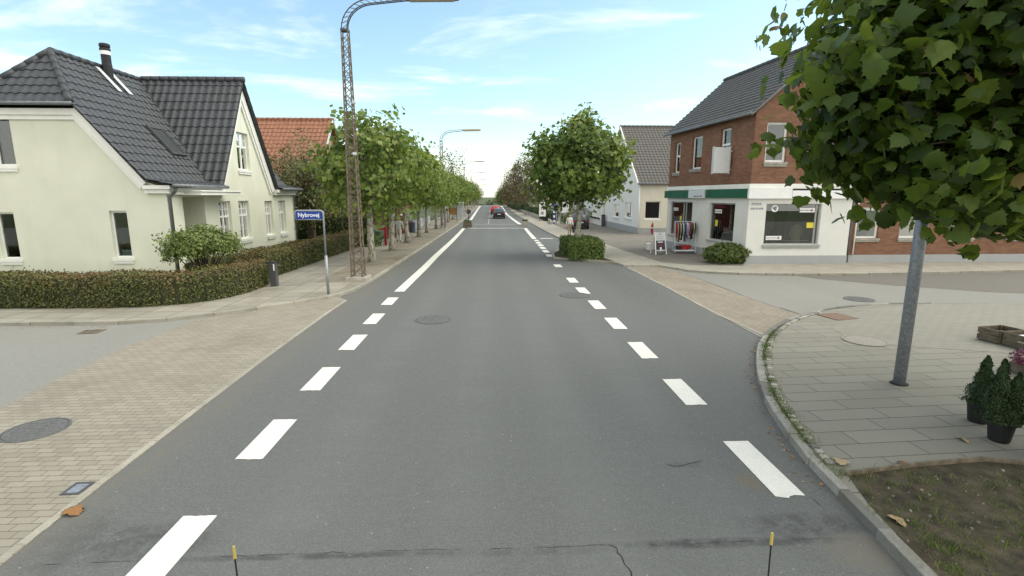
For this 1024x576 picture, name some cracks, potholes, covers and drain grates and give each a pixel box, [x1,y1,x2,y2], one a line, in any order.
manhole cover [415,315,451,324]
manhole cover [0,417,72,443]
manhole cover [842,335,889,347]
crack [33,538,818,576]
utility cover [59,481,95,495]
